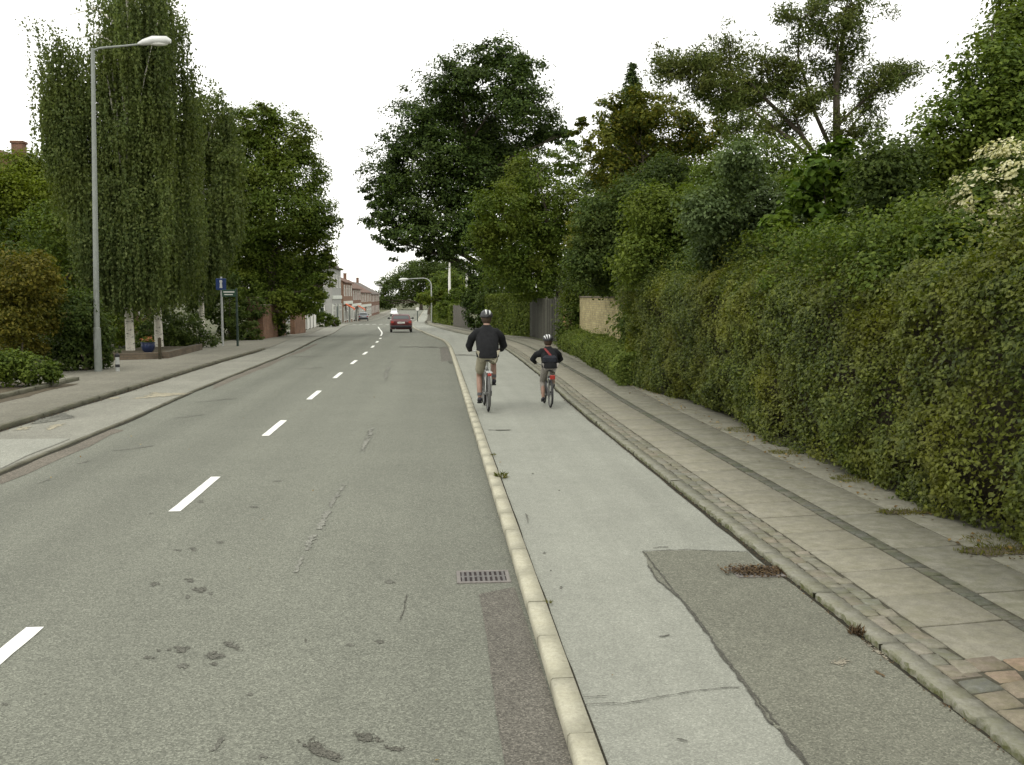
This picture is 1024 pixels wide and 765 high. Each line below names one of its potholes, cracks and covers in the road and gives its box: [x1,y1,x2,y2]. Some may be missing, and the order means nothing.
pothole [353,731,384,742]
pothole [297,736,342,763]
crack [583,687,726,705]
